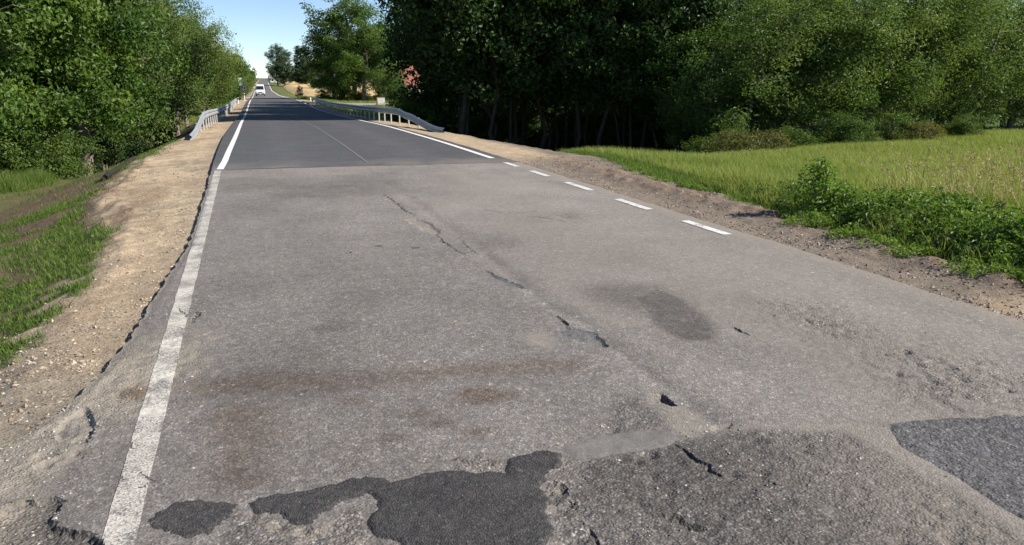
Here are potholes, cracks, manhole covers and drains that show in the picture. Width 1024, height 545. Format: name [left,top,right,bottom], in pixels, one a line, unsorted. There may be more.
crack [436,234,479,256]
pothole [657,393,678,406]
crack [384,194,415,215]
crack [675,444,733,478]
